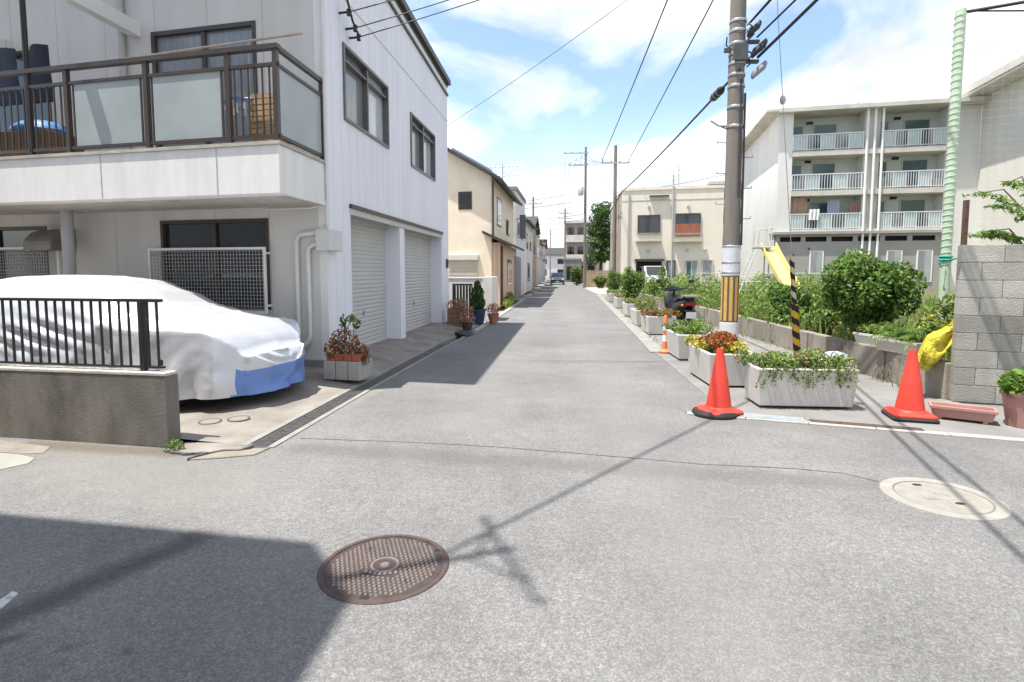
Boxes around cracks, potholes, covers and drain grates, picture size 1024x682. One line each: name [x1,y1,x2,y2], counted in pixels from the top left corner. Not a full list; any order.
drain grate [253,417,316,448]
drain grate [356,369,402,389]
manhole cover [879,477,1012,521]
drain grate [304,389,367,418]
manhole cover [317,534,449,605]
drain grate [740,413,805,422]
